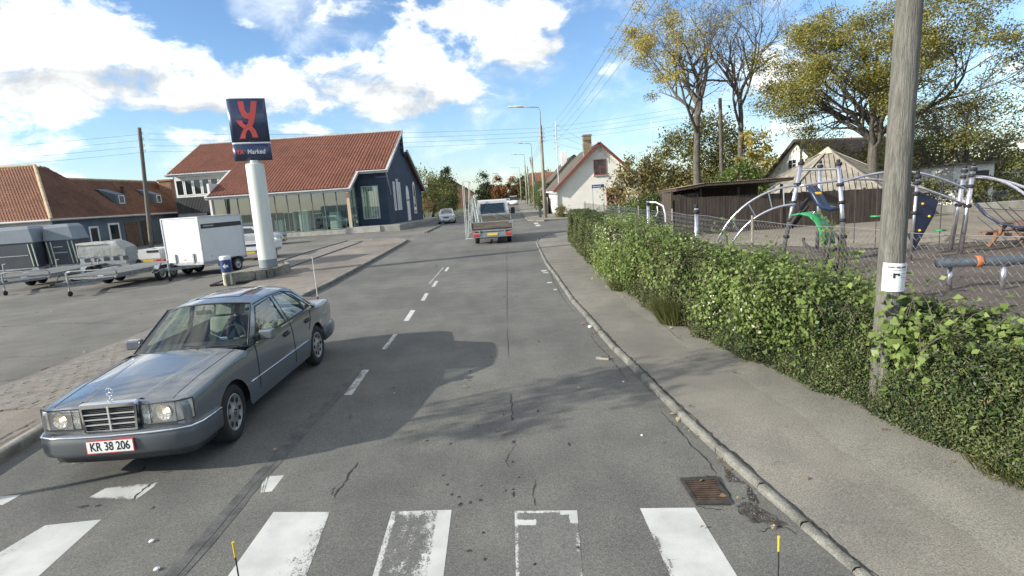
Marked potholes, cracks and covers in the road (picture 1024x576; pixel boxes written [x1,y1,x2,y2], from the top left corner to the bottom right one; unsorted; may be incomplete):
crack [331,462,358,499]
drain grate [679,476,731,505]
